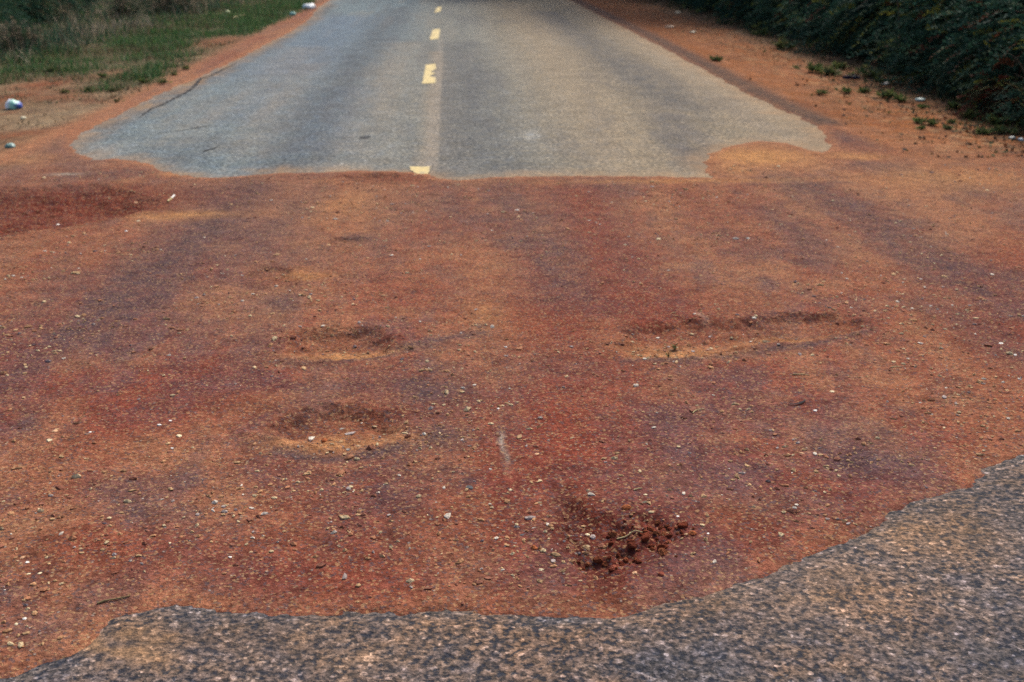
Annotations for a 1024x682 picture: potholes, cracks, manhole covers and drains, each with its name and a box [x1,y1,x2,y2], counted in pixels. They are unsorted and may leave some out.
crack [140,63,236,134]
pothole [549,497,682,588]
pothole [252,400,410,449]
pothole [266,324,404,362]
pothole [612,310,872,360]
